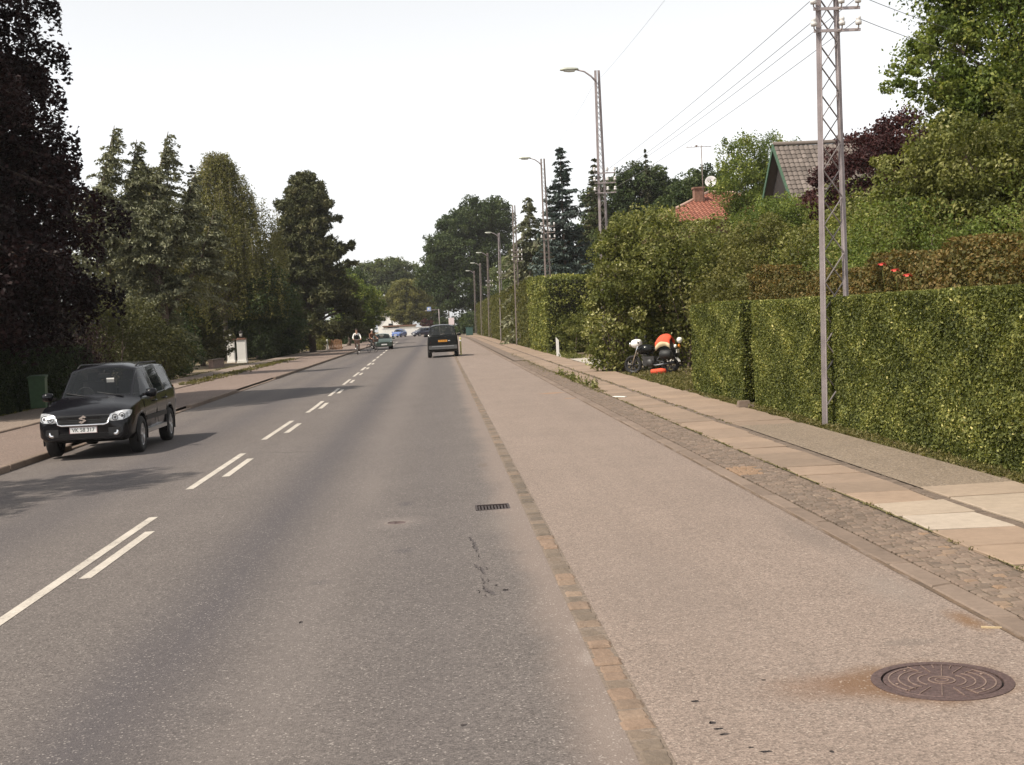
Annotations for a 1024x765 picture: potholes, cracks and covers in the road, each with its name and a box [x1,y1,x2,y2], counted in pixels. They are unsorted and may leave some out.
manhole cover [871,662,1015,701]
crack [469,537,497,597]
drain grate [475,503,510,511]
